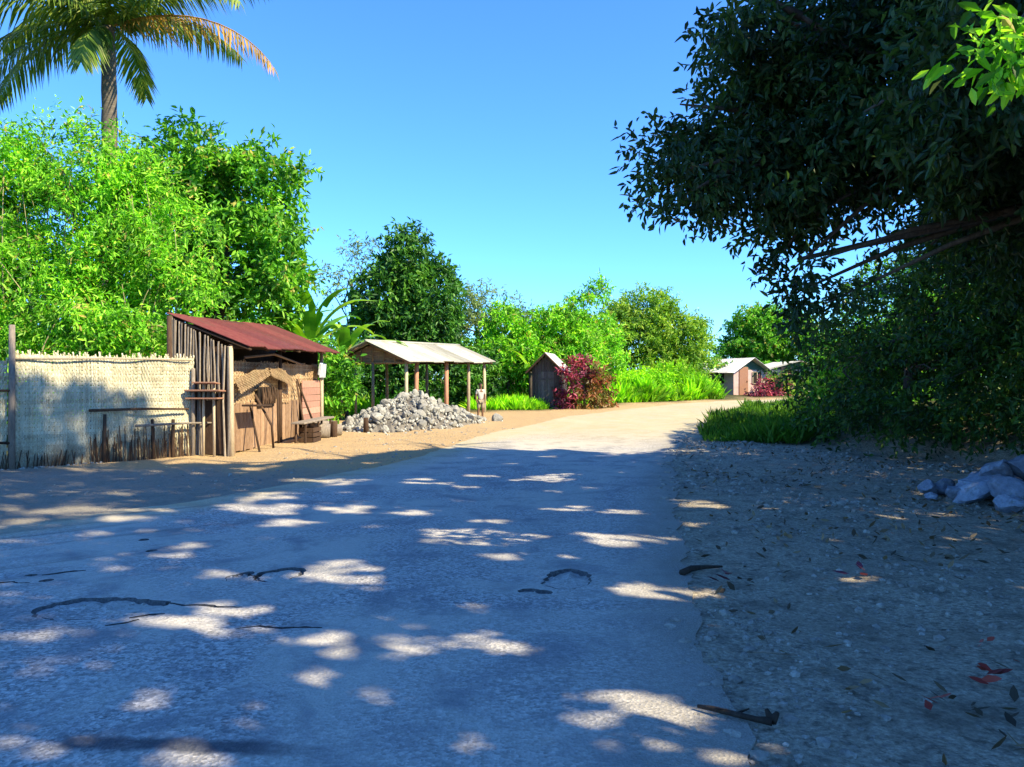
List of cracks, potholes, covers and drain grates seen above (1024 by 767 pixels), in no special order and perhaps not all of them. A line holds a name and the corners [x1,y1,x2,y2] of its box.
crack [105,602,240,626]
crack [0,570,86,584]
